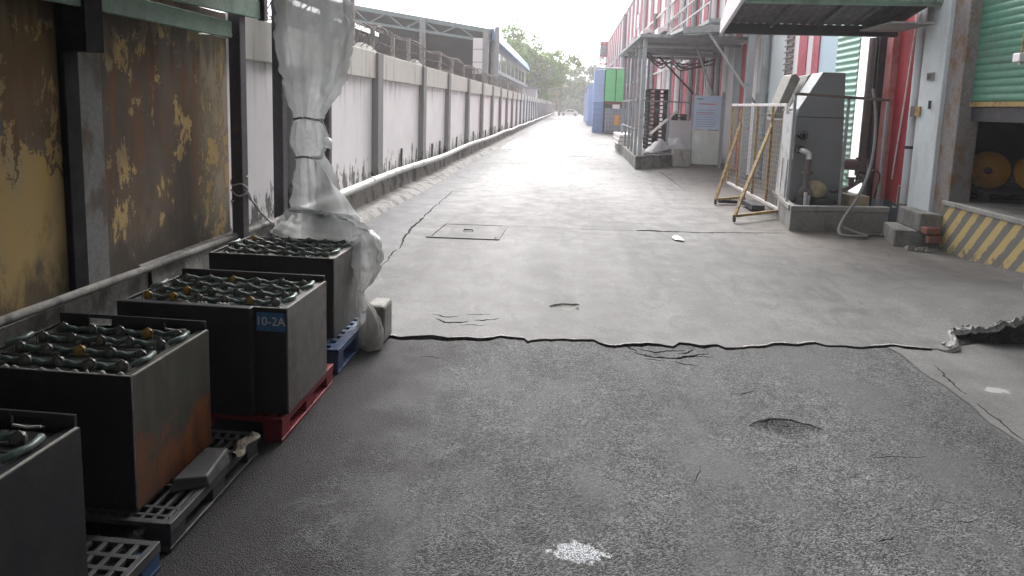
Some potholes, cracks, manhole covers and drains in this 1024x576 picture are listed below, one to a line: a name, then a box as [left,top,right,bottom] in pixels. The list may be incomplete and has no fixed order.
pothole [749,418,827,441]
crack [380,191,453,268]
manhole cover [426,223,508,240]
crack [387,314,1024,441]
pothole [549,303,580,311]
